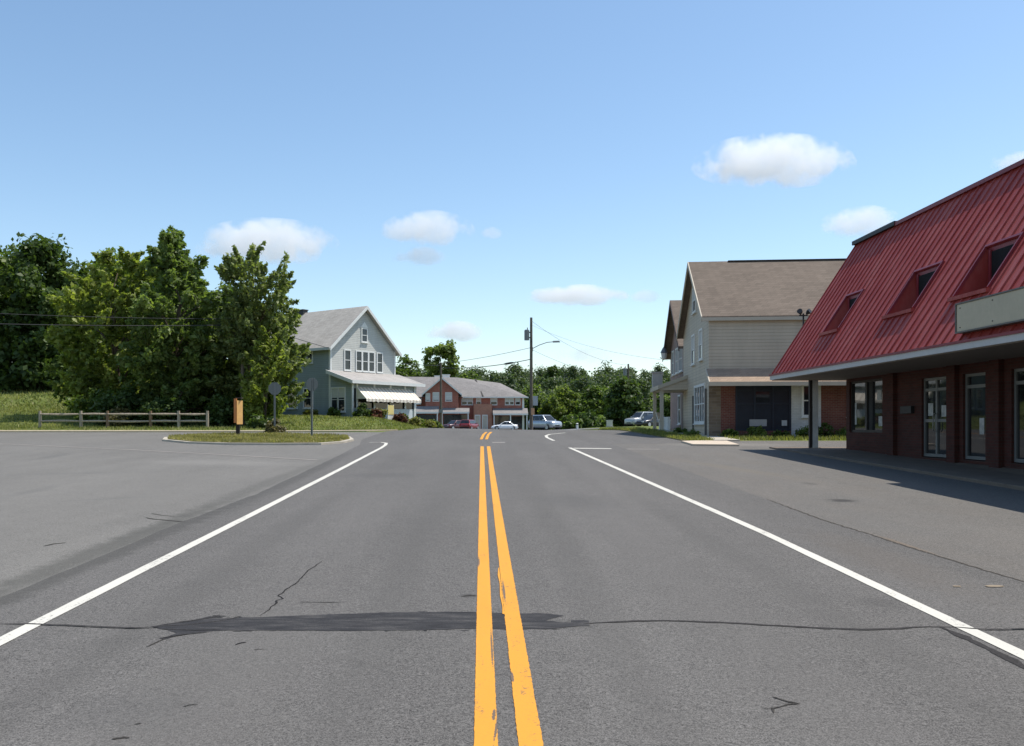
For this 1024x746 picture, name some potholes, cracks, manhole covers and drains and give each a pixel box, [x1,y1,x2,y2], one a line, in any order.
crack [771,696,800,713]
